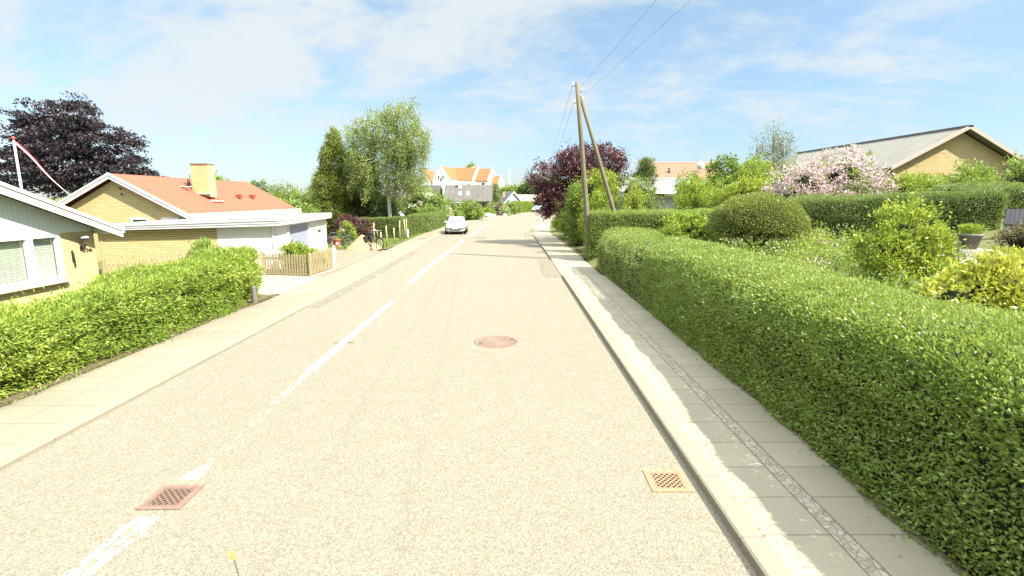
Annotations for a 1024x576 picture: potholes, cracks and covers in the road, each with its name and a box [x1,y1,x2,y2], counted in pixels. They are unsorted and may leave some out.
drain grate [135,485,205,510]
manhole cover [474,336,518,348]
drain grate [642,470,694,492]
